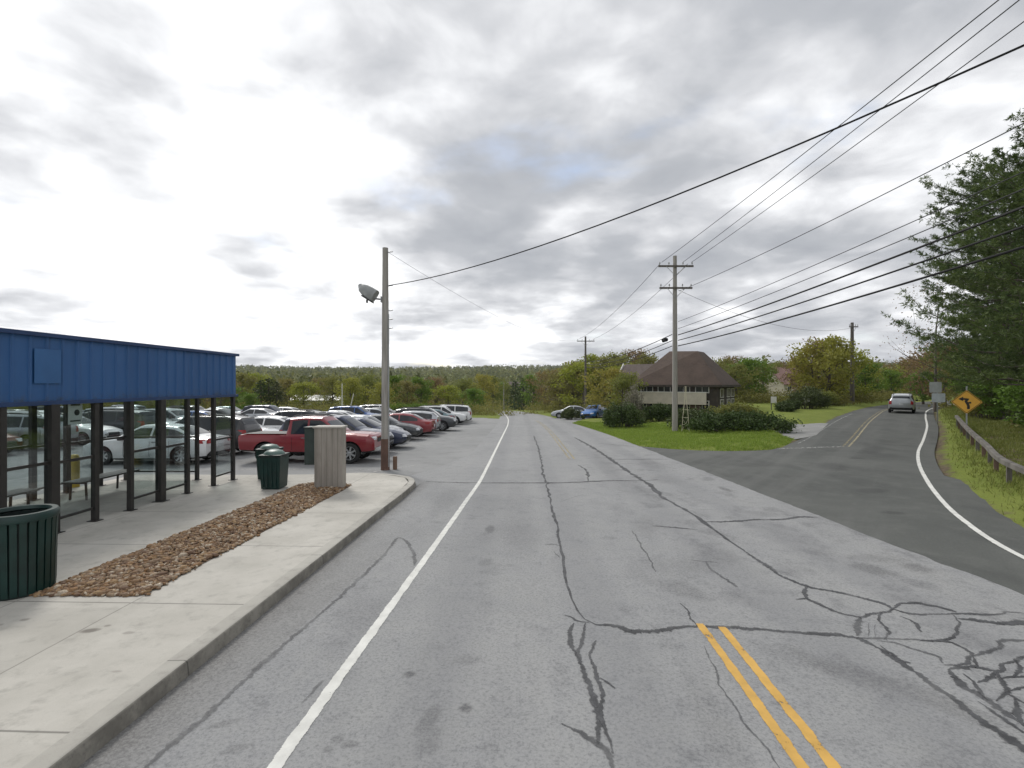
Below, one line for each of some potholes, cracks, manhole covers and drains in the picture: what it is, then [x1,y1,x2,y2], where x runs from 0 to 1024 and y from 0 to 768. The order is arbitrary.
crack [426,437,1024,752]
